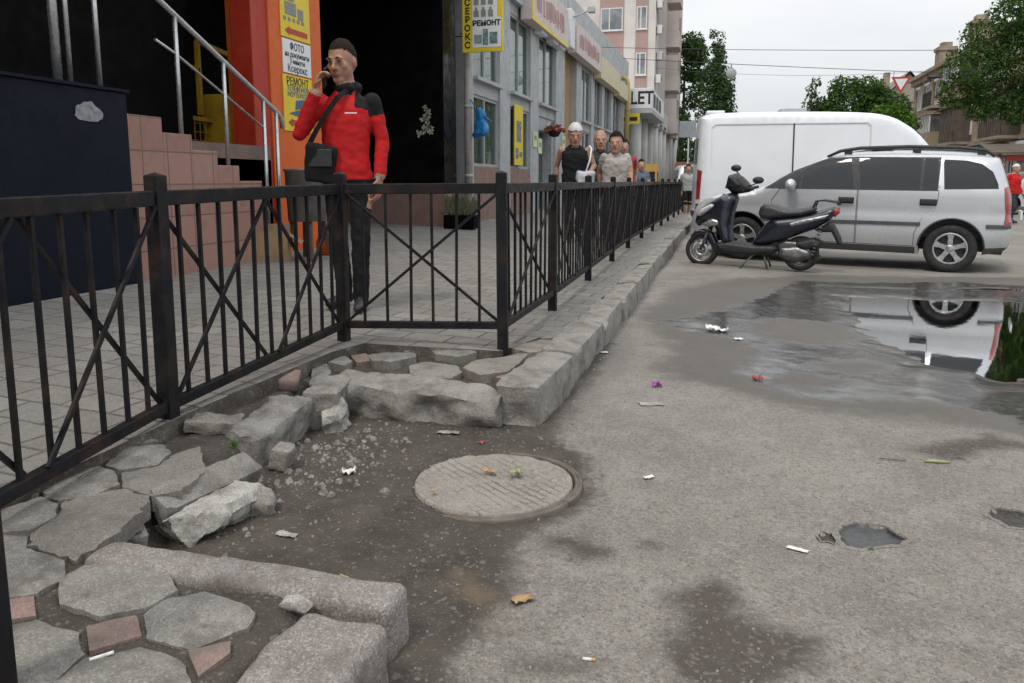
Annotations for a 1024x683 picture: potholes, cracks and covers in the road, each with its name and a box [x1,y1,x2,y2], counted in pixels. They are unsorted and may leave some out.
pothole [979,504,1024,530]
pothole [832,519,915,552]
manhole cover [414,452,583,524]
pothole [816,530,838,545]
